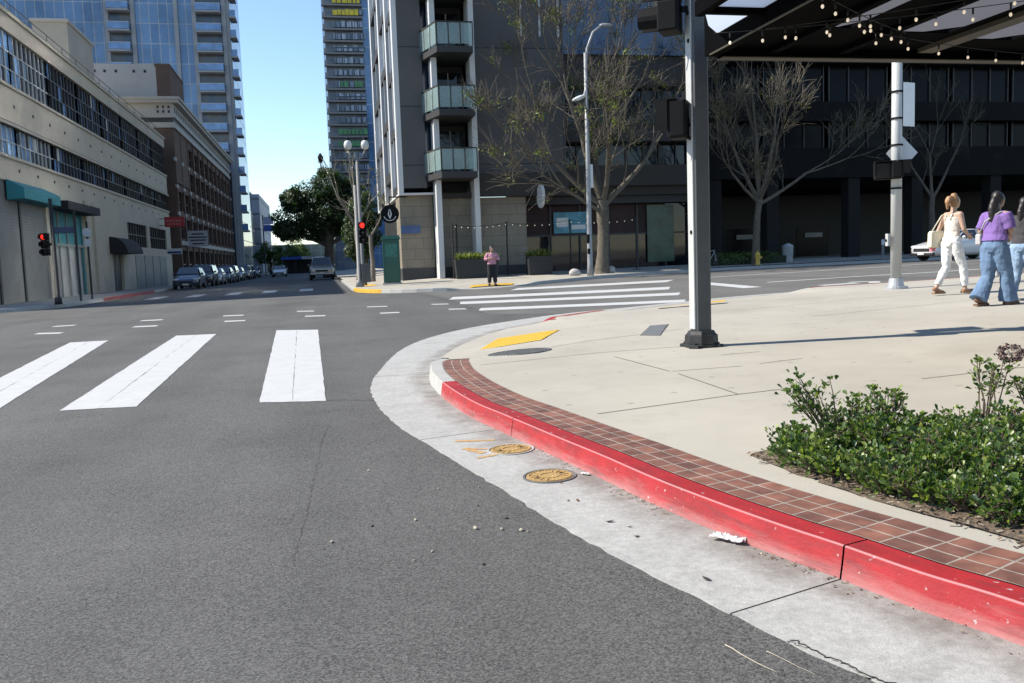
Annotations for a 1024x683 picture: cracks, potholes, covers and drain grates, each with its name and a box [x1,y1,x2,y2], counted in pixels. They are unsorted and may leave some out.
manhole cover [488,347,551,356]
crack [787,640,897,683]
manhole cover [487,443,534,455]
manhole cover [523,468,577,484]
utility cover [640,324,669,336]
